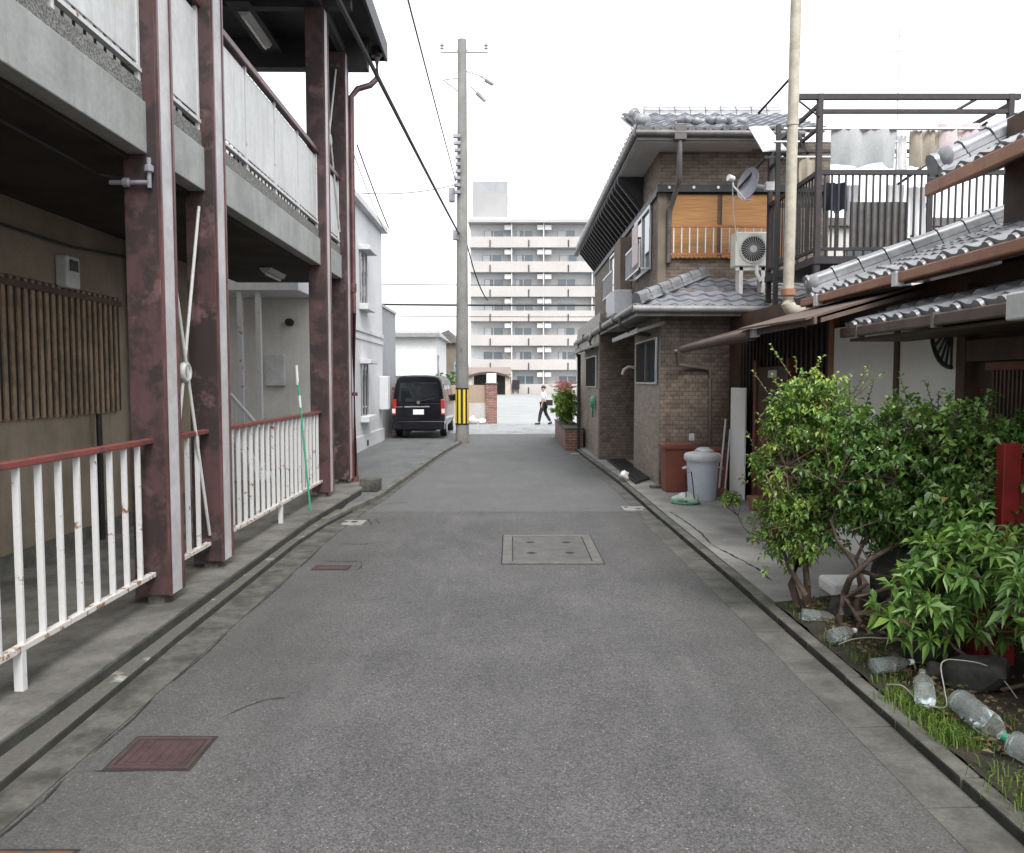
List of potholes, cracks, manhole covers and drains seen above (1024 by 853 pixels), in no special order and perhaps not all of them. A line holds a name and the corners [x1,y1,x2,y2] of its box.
manhole cover [102,736,218,771]
manhole cover [501,535,605,565]
drain grate [607,459,649,484]
crack [0,549,319,836]
crack [670,512,772,580]
